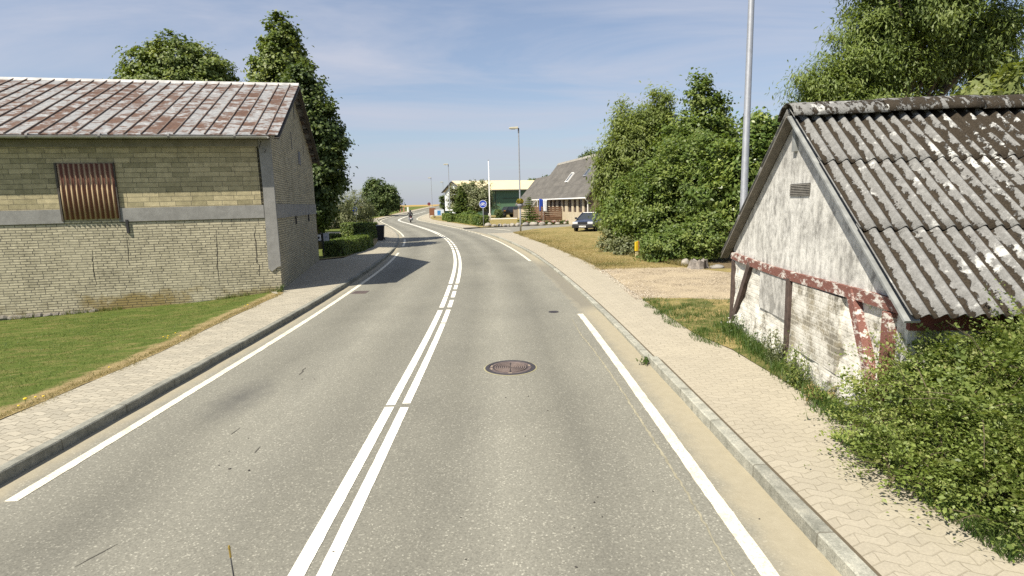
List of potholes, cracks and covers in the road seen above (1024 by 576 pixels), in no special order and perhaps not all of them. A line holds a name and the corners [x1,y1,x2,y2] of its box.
manhole cover [484,360,537,376]
